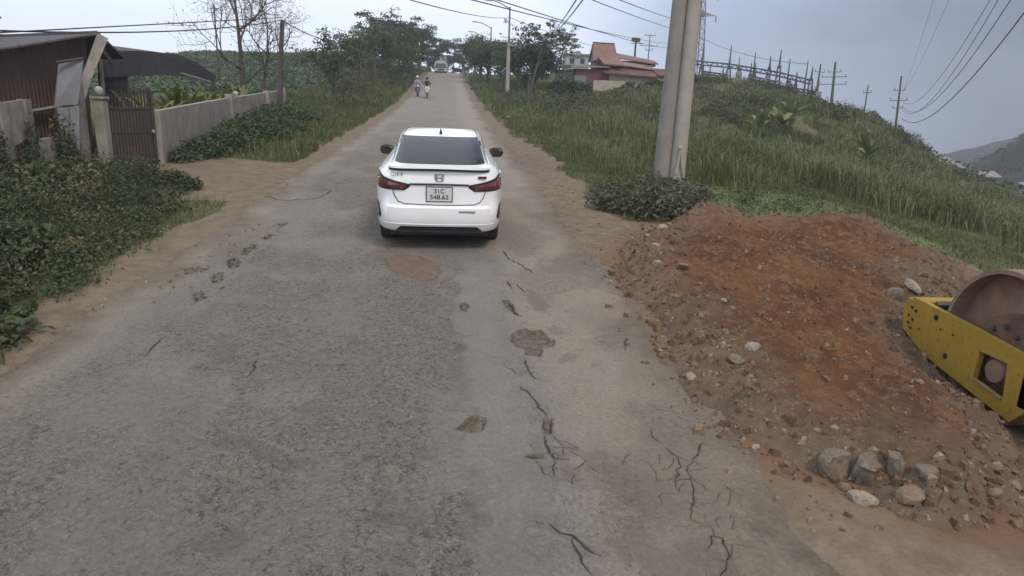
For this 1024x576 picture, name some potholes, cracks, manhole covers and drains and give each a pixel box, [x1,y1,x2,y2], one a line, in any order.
crack [143,338,164,357]
pothole [508,328,558,358]
pothole [457,301,472,313]
crack [502,359,599,484]
crack [267,183,346,201]
crack [502,251,533,293]
pothole [500,299,523,317]
pothole [451,413,490,435]
crack [248,360,258,375]
crack [532,520,601,576]
crack [621,430,757,576]
